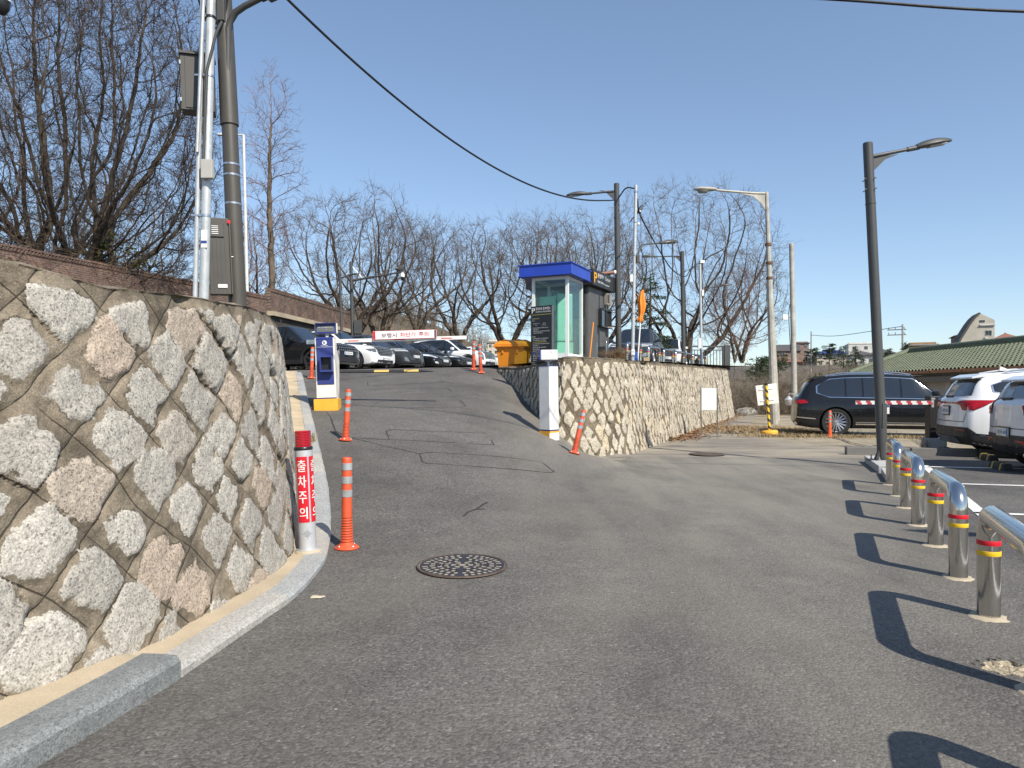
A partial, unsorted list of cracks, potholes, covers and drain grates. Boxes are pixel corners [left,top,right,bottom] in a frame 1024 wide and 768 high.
manhole cover [417,553,508,578]
pothole [972,656,1024,678]
